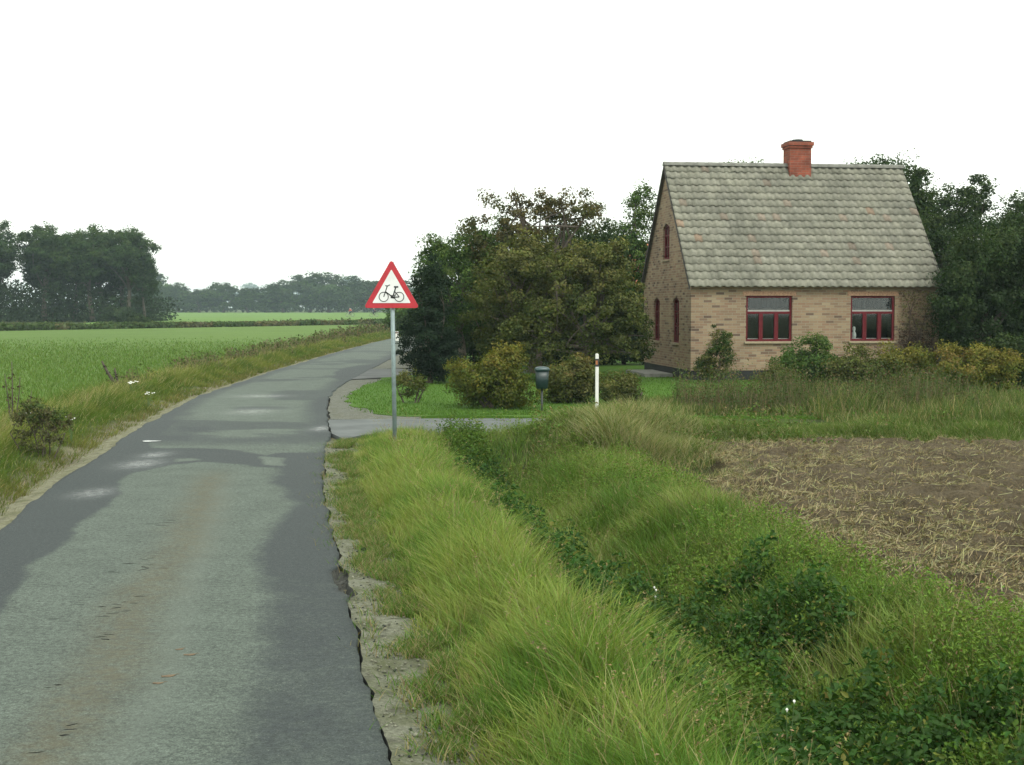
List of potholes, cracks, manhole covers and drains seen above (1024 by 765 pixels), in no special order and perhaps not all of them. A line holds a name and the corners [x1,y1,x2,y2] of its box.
crack [347,602,392,765]
crack [321,460,342,571]
